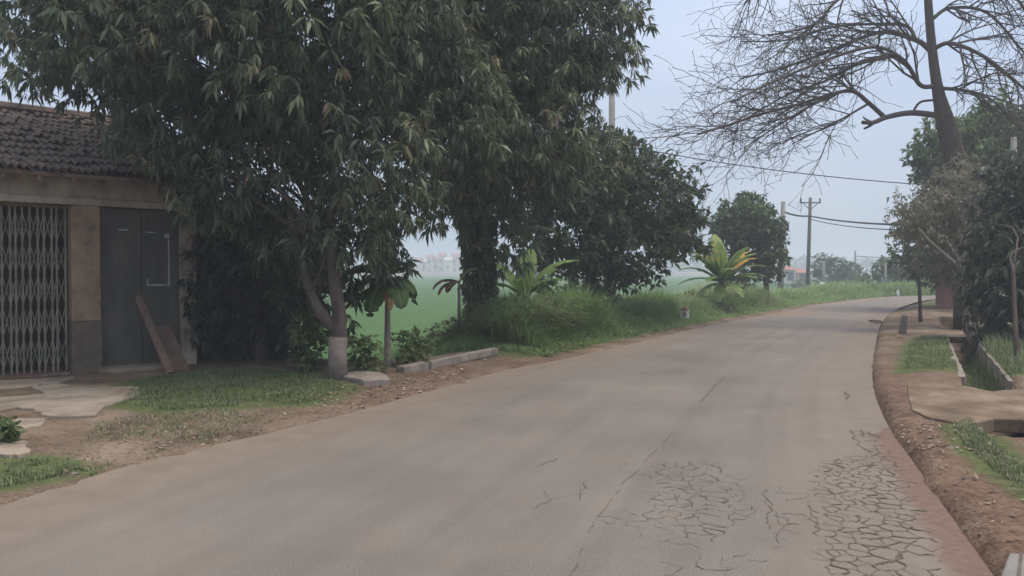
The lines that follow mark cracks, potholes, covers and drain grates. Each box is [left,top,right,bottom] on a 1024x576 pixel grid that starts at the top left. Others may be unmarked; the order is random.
crack [535,428,942,576]
